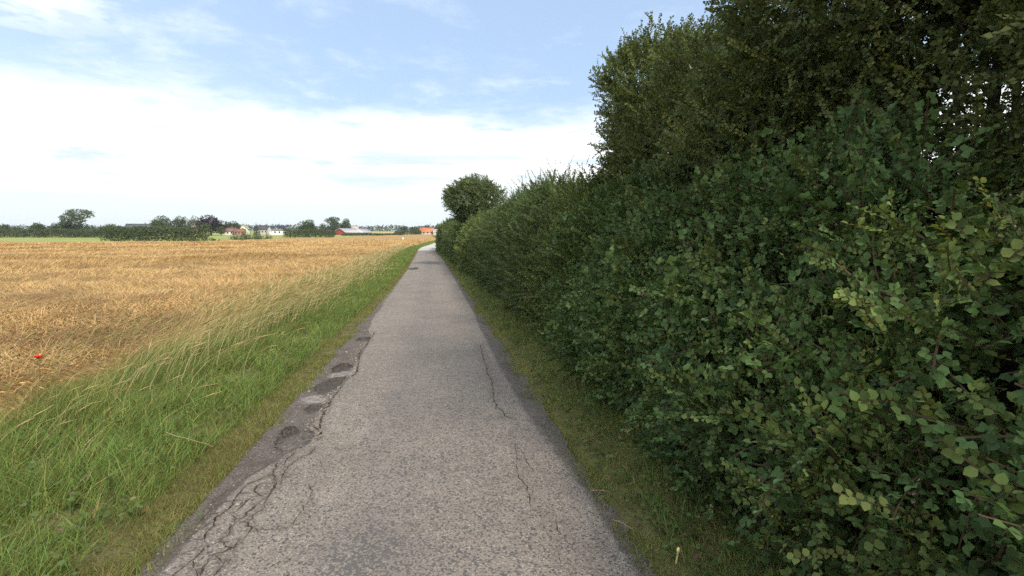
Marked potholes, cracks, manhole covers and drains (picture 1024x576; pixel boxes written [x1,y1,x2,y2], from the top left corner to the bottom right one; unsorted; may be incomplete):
pothole [274,426,315,453]
crack [172,332,375,576]
pothole [331,363,353,372]
pothole [314,376,346,394]
crack [480,345,509,418]
pothole [304,404,322,414]
crack [510,441,531,507]
